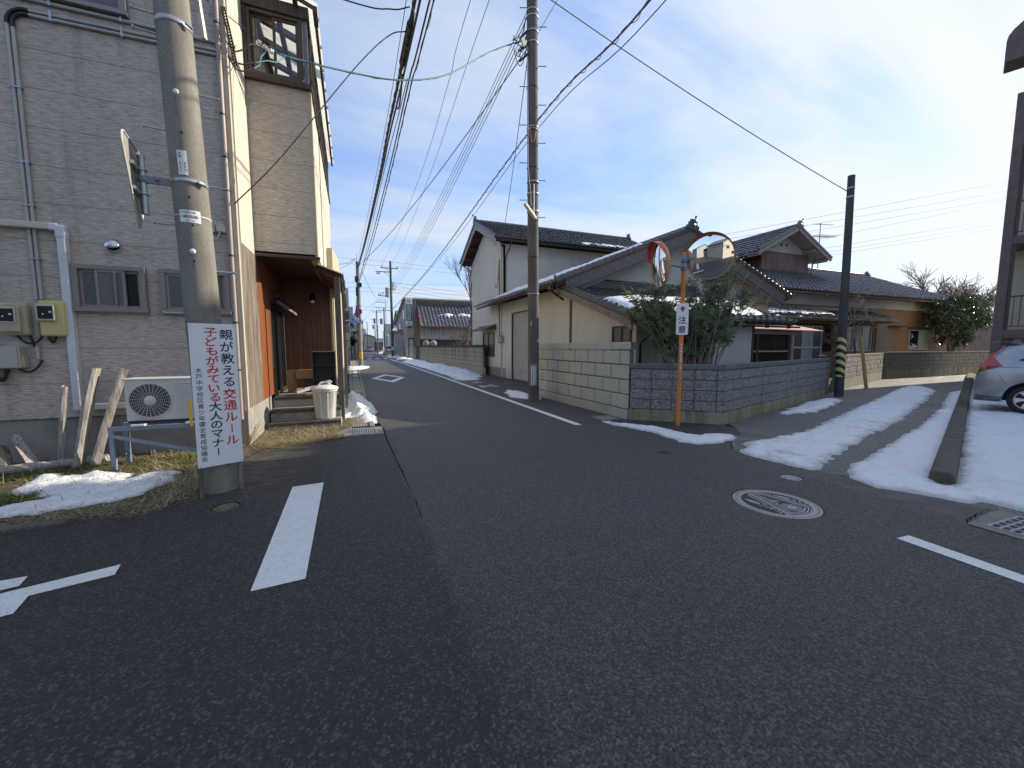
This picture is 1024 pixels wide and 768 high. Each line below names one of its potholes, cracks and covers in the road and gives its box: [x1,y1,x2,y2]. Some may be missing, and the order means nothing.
manhole cover [212,503,239,511]
crack [383,428,422,517]
drain grate [967,510,1024,540]
drain grate [337,426,384,438]
manhole cover [731,489,825,519]
